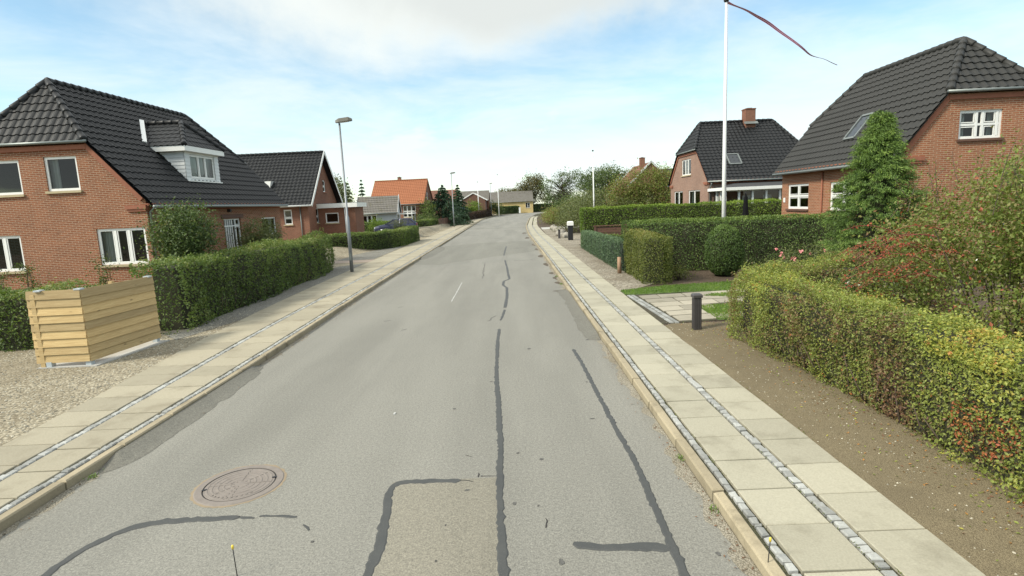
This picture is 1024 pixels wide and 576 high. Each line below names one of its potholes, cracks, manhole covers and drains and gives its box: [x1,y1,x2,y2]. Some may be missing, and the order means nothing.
manhole cover [190,464,287,508]
